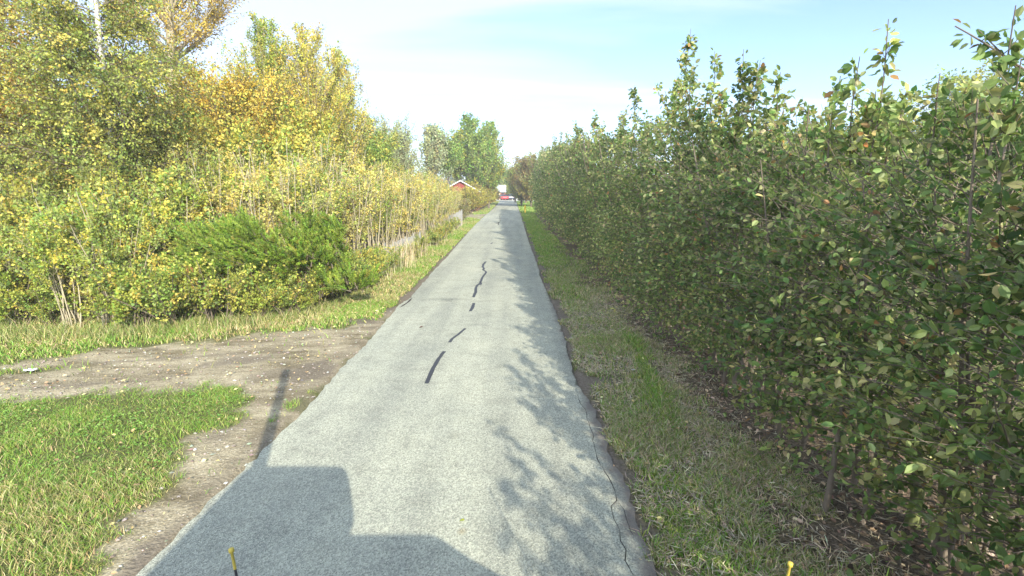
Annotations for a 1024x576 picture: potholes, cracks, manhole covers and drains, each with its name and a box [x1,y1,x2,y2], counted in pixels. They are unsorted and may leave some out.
crack [579,400,633,575]
